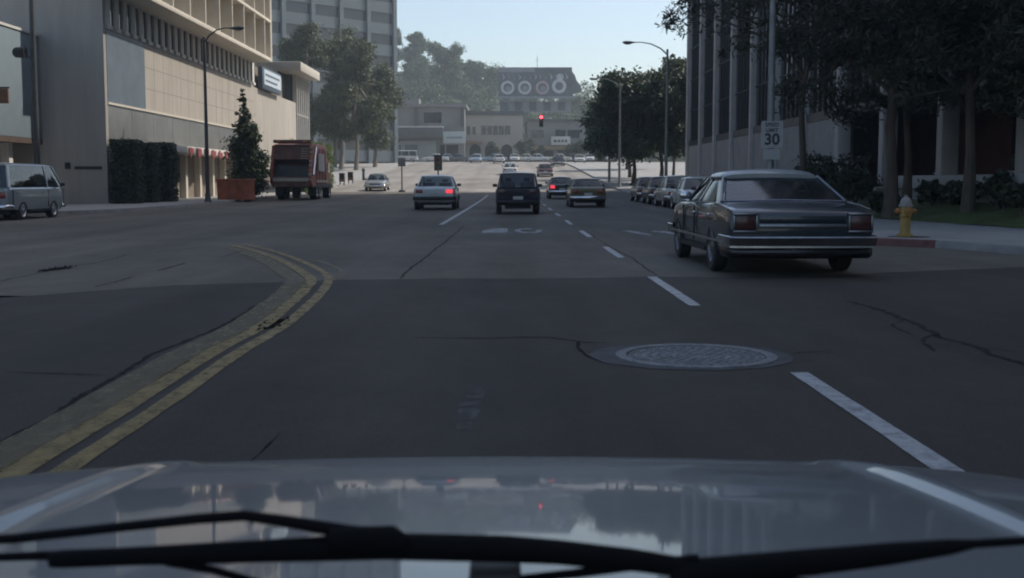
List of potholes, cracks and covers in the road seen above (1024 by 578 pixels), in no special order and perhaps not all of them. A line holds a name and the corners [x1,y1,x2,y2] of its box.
pothole [257,316,290,330]
crack [250,433,279,461]
crack [428,336,603,362]
manhole cover [588,343,793,370]
crack [875,309,1017,363]
